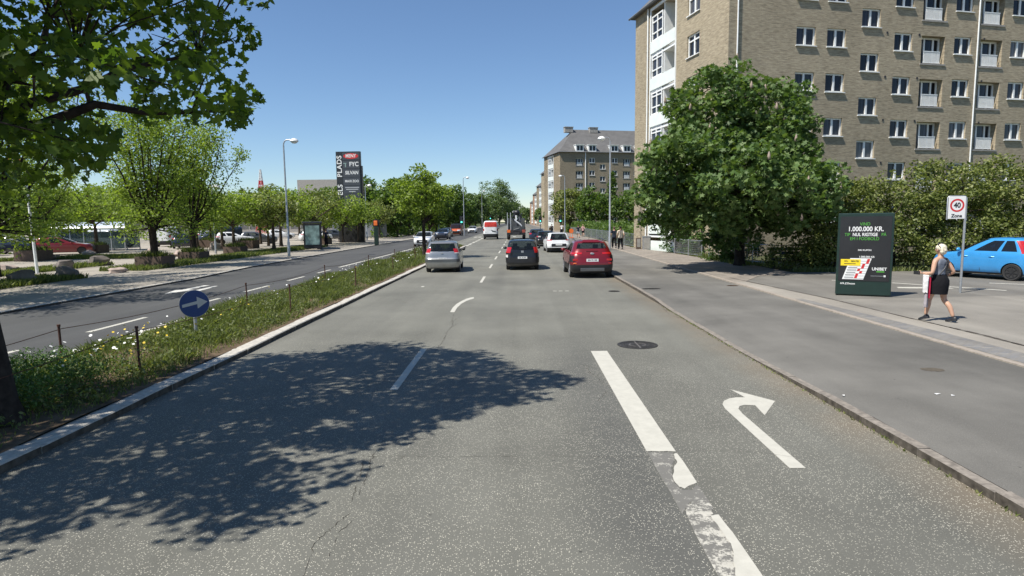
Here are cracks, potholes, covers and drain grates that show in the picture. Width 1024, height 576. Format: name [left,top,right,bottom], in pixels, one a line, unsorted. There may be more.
crack [303,454,509,576]
manhole cover [617,341,658,349]
